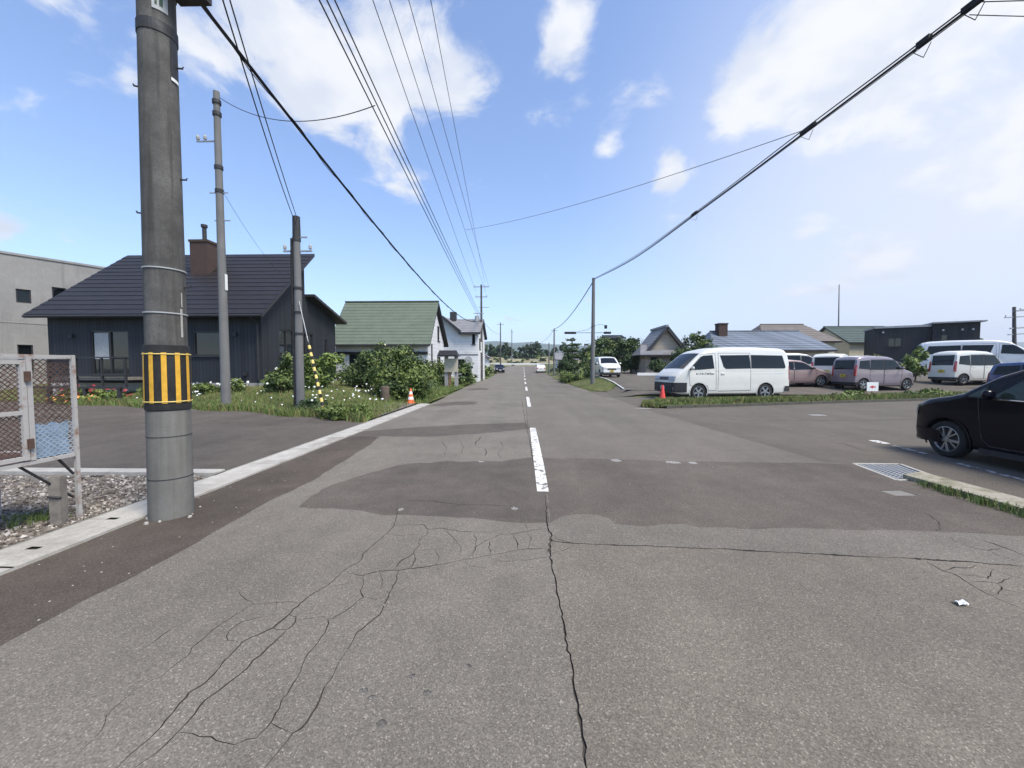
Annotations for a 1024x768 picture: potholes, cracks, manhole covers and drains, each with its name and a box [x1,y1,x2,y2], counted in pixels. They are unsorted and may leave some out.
crack [66,500,1024,768]
drain grate [852,463,926,481]
